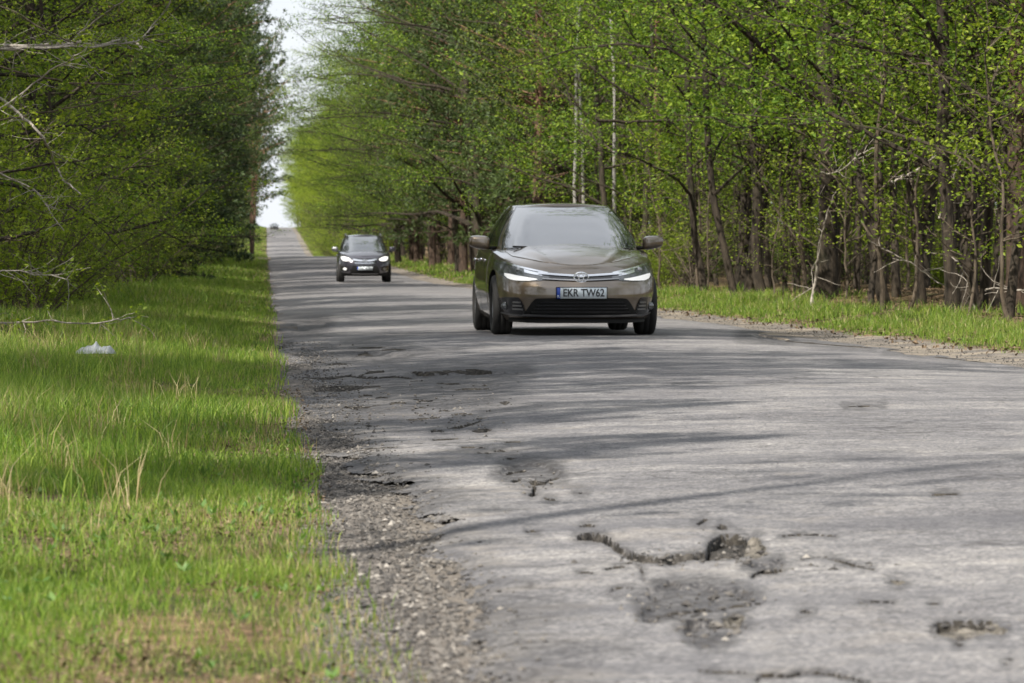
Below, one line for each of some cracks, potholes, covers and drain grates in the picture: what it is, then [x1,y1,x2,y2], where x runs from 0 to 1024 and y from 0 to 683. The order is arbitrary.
crack [300,347,558,501]
pothole [411,370,524,379]
pothole [722,615,745,630]
pothole [682,619,747,647]
crack [577,524,782,591]
pothole [935,624,1008,639]
pothole [710,543,745,561]
crack [828,559,874,570]
pothole [636,580,754,623]
pothole [740,537,767,559]
